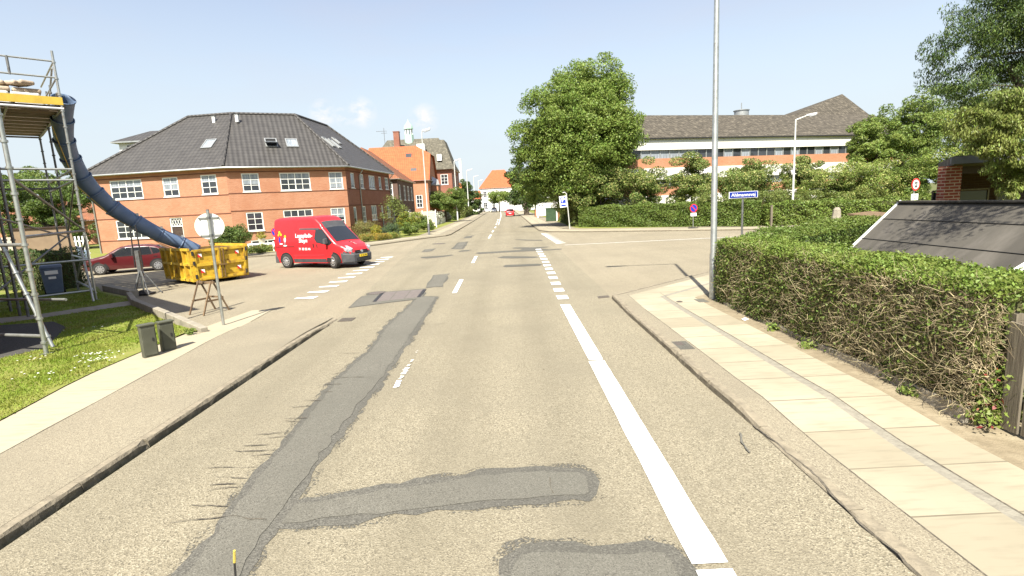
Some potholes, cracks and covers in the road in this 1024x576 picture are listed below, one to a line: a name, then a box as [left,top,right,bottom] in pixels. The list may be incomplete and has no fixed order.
crack [170,372,343,523]
